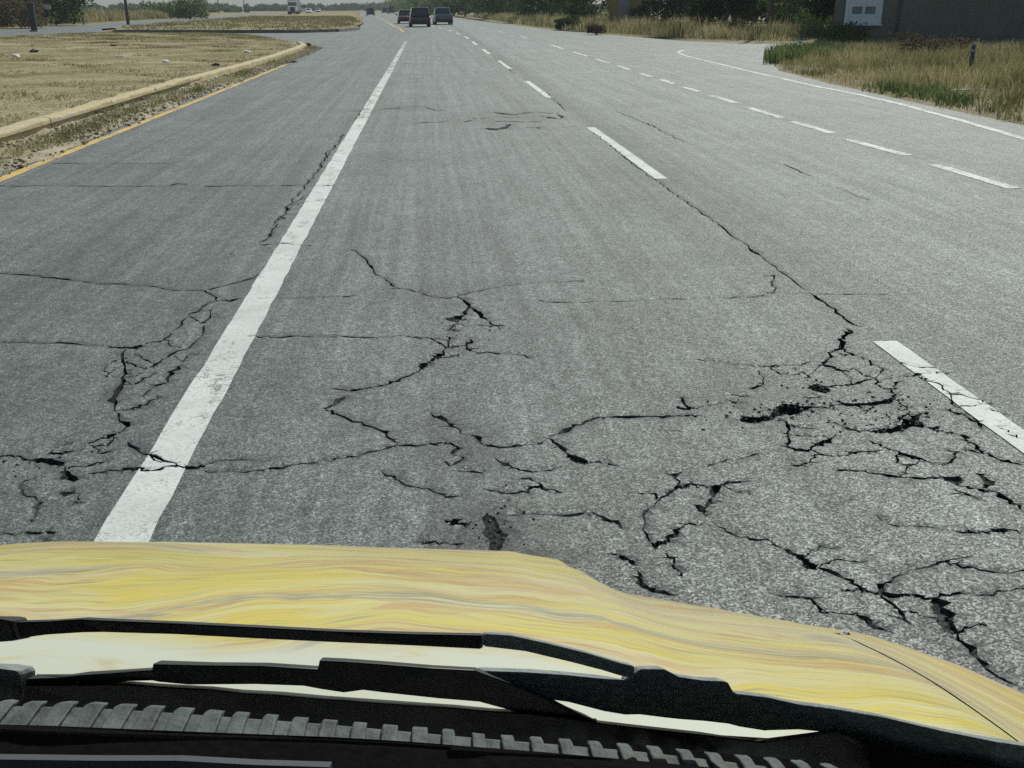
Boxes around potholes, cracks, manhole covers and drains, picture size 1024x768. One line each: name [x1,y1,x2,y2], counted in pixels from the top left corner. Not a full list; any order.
crack [0,250,1022,510]
crack [414,519,467,545]
pothole [482,514,509,551]
crack [0,480,56,541]
pothole [734,403,813,423]
crack [614,453,1024,681]
crack [512,513,622,528]
crack [465,112,564,130]
crack [206,110,362,246]
